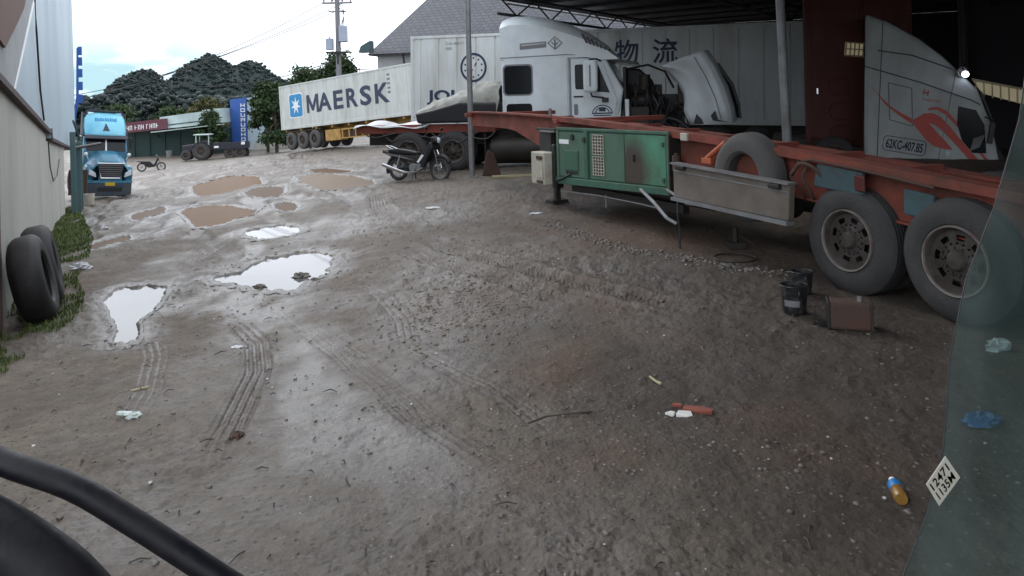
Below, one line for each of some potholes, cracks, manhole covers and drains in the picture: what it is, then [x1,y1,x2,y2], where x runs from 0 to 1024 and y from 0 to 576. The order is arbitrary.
pothole [125,205,170,222]
pothole [189,175,268,197]
pothole [94,280,175,350]
pothole [196,246,346,295]
pothole [269,200,303,212]
pothole [234,222,311,242]
pothole [174,204,263,230]
pothole [291,172,380,192]
pothole [80,233,141,253]
pothole [240,184,289,198]
